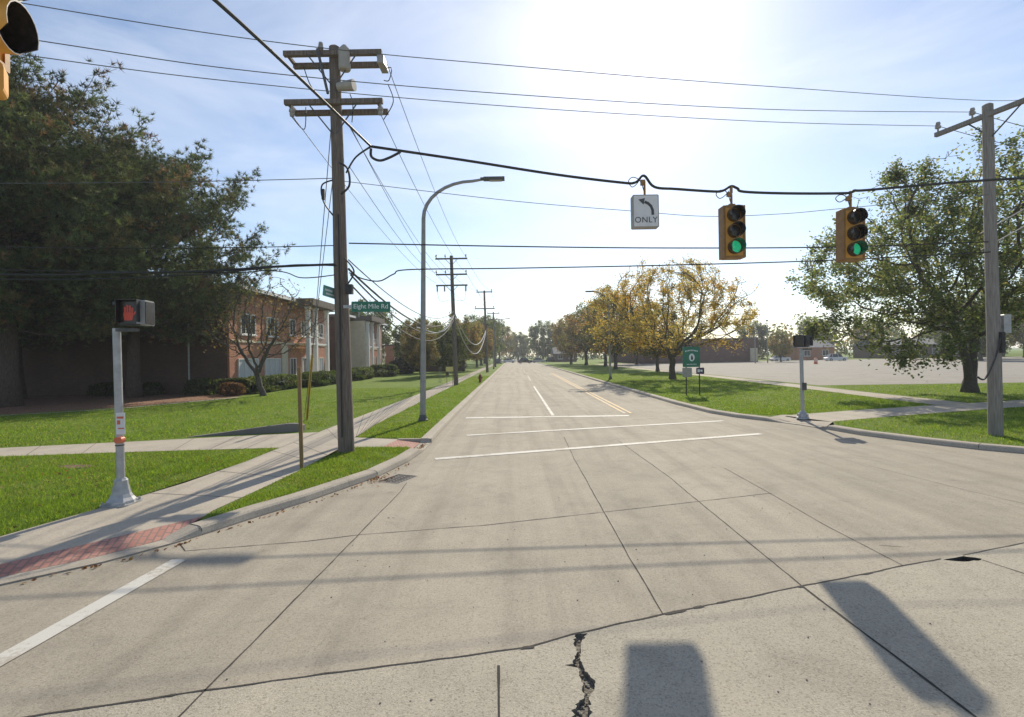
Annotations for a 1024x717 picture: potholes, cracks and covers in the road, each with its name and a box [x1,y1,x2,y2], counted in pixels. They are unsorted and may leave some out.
drain grate [377,474,417,484]
crack [567,633,595,717]
